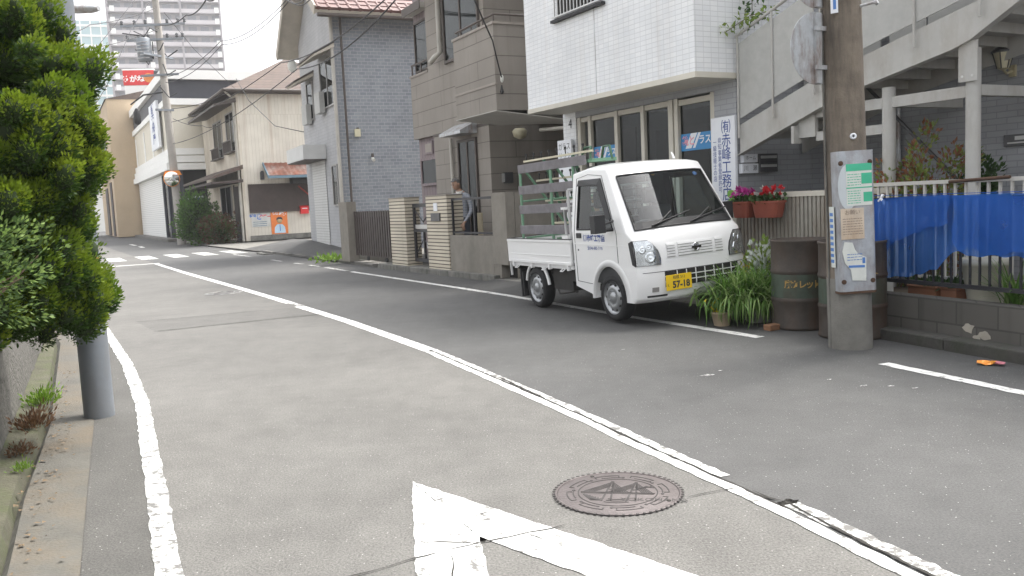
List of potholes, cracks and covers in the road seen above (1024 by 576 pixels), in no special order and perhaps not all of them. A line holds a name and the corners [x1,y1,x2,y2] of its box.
manhole cover [552,471,689,516]
